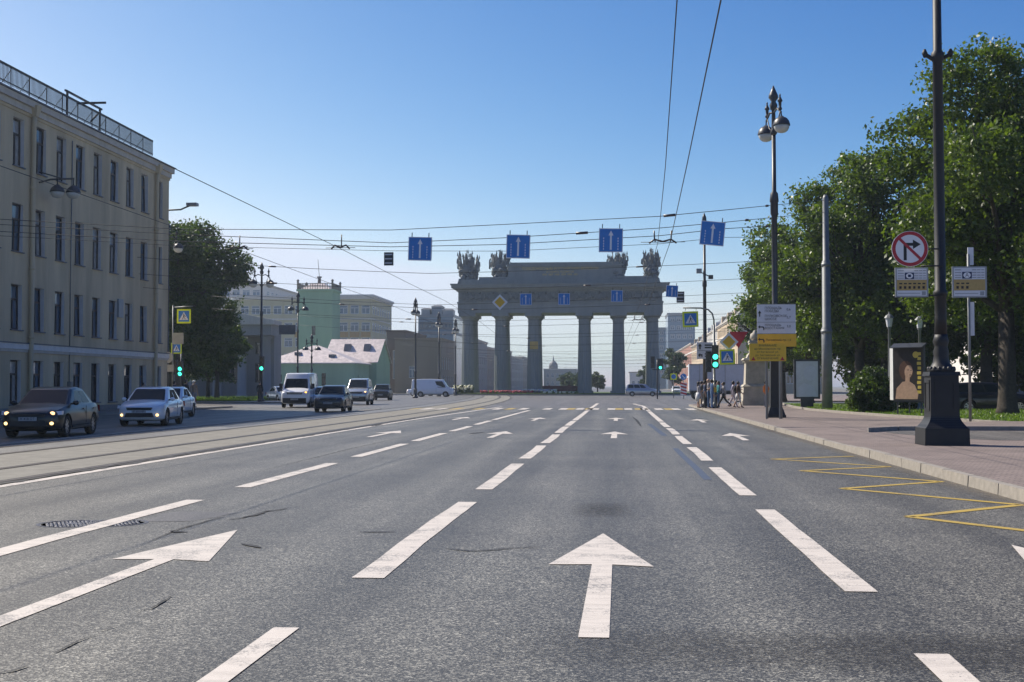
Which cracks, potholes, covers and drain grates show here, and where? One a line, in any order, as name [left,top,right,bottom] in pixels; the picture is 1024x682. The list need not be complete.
crack [152,508,286,541]
